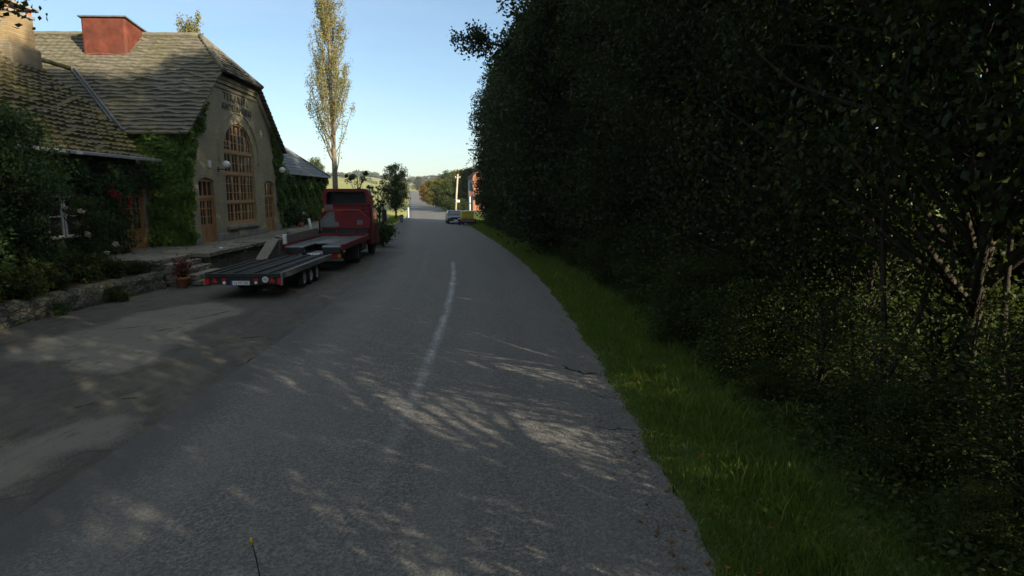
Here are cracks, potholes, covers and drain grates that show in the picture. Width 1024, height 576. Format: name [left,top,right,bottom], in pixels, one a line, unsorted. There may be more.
crack [563,365,604,375]
